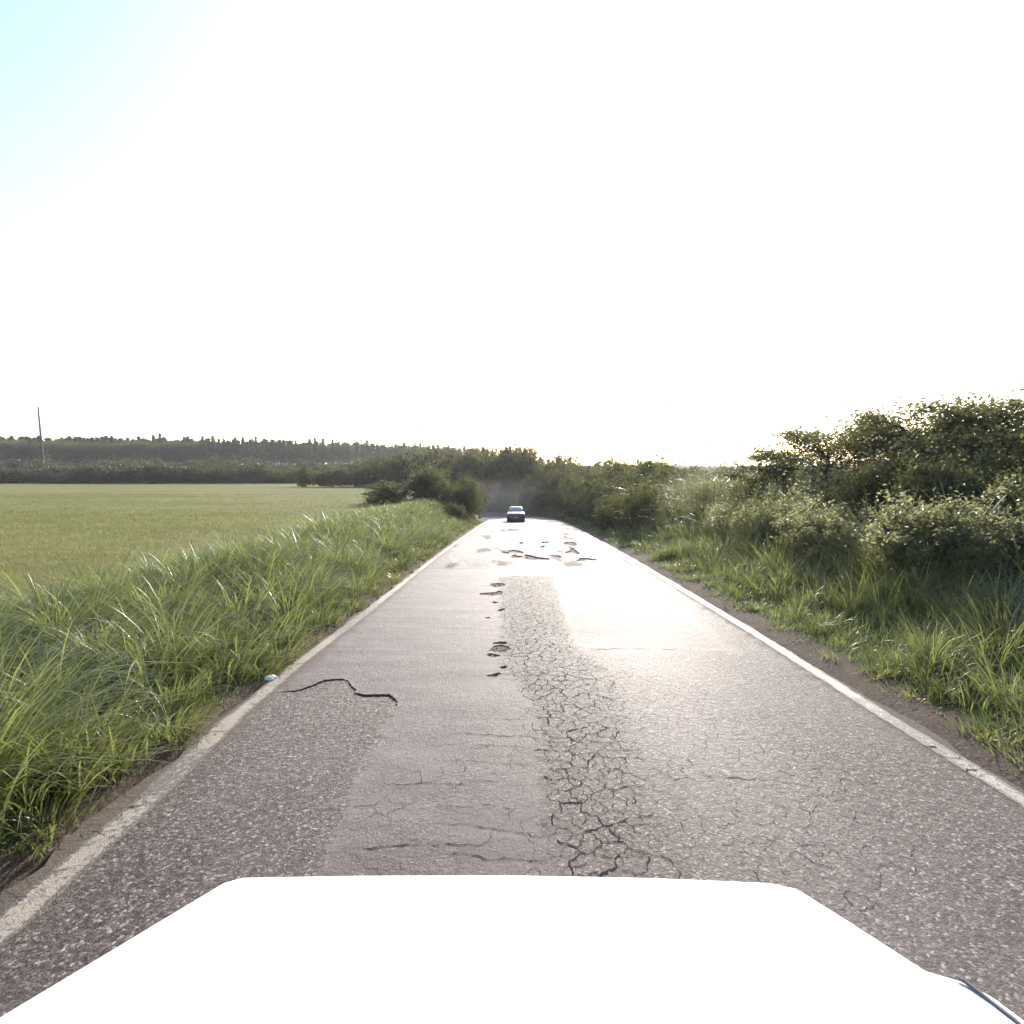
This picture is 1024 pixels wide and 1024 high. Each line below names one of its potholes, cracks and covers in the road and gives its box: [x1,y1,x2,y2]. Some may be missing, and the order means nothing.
crack [348,577,924,937]
